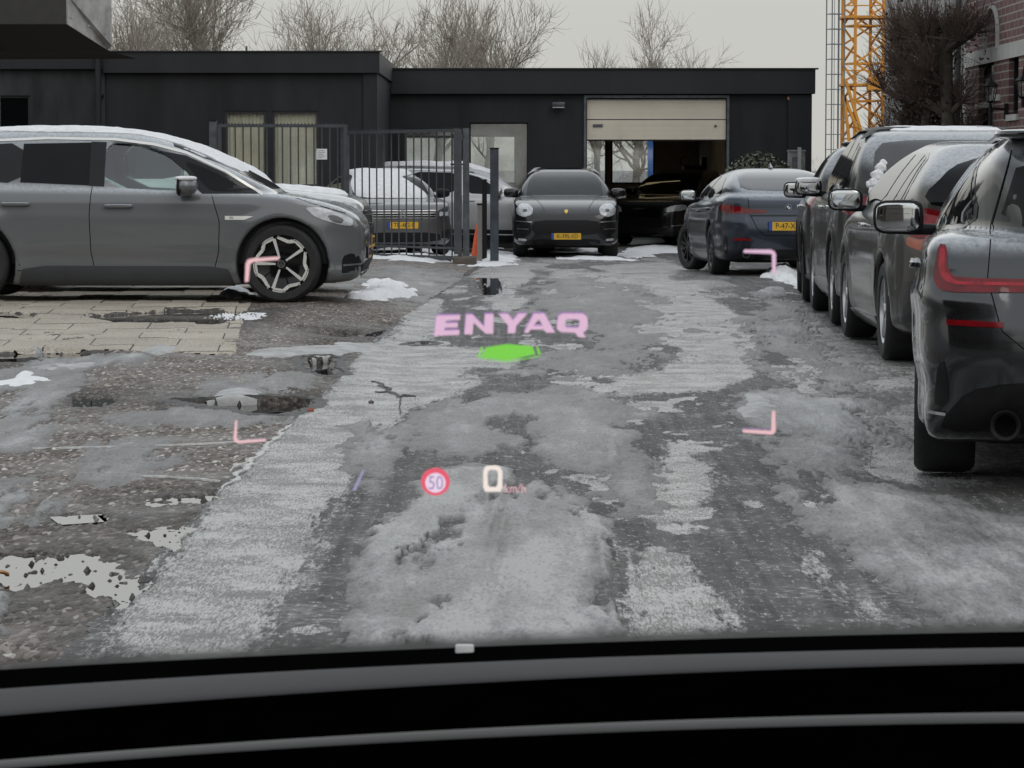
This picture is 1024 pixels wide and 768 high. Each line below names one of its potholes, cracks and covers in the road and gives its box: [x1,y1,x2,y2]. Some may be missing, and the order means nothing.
crack [371,380,416,414]
pothole [289,354,355,377]
pothole [158,395,330,416]
